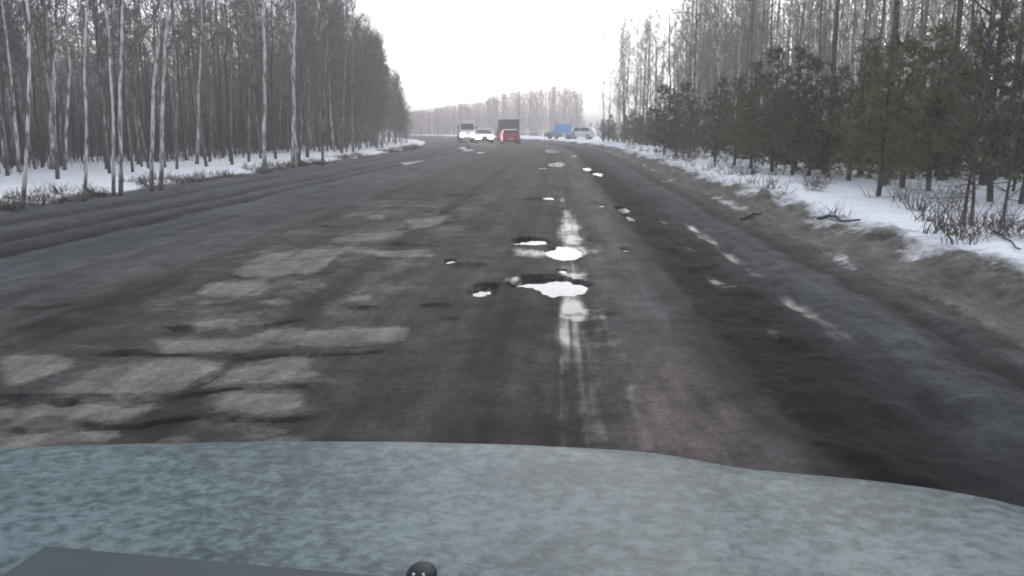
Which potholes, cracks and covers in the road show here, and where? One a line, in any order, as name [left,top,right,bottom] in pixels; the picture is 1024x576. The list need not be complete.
pothole [510,236,550,245]
pothole [543,245,585,261]
pothole [505,273,595,298]
pothole [466,282,500,297]
crack [0,383,314,435]
crack [154,350,383,361]
